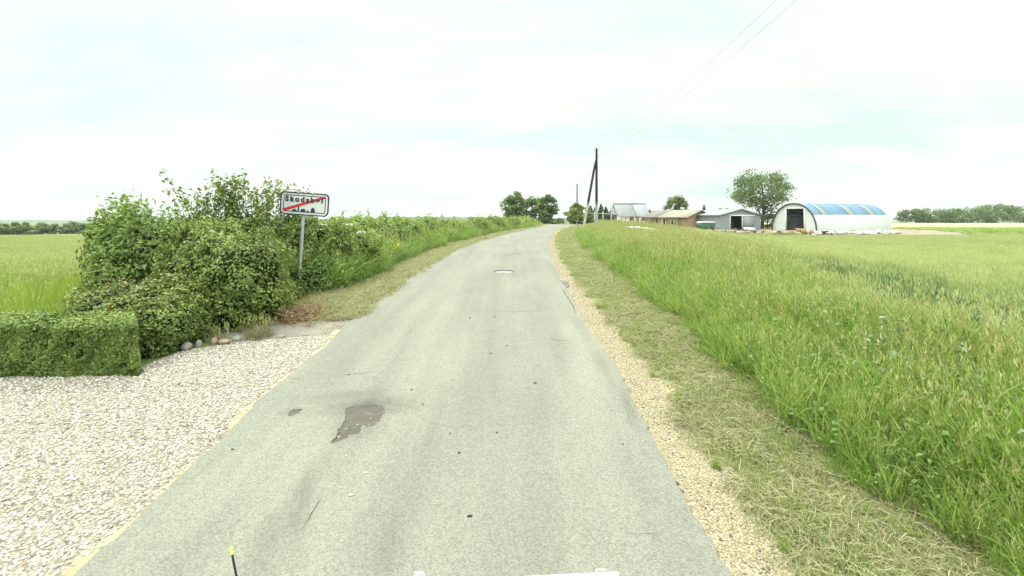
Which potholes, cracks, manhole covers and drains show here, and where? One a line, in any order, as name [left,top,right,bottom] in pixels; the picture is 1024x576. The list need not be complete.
pothole [330,404,385,444]
